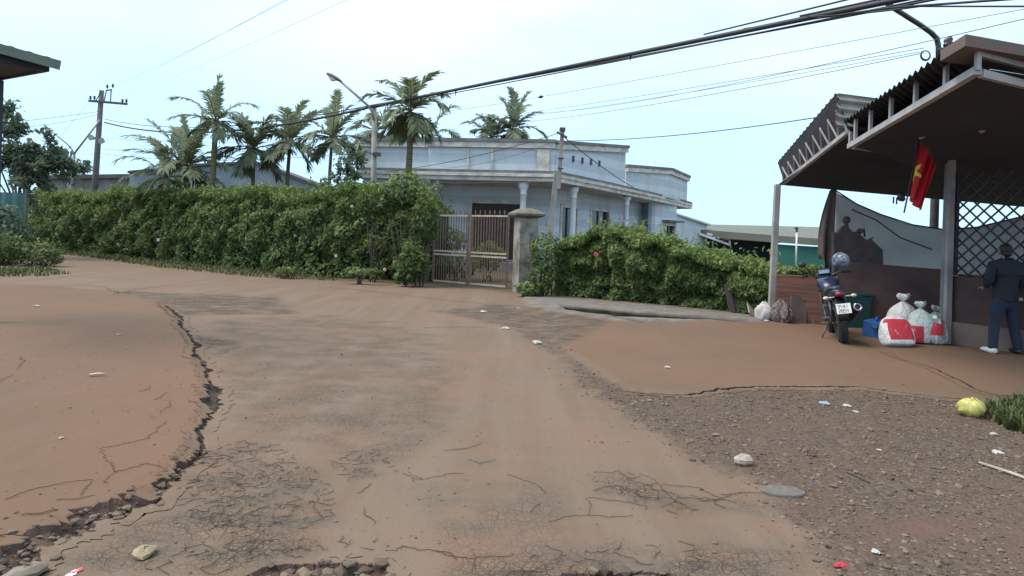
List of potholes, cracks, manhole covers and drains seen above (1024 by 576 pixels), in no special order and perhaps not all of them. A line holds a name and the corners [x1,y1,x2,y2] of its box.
crack [6,285,733,576]
pothole [225,554,411,576]
crack [621,383,961,401]
